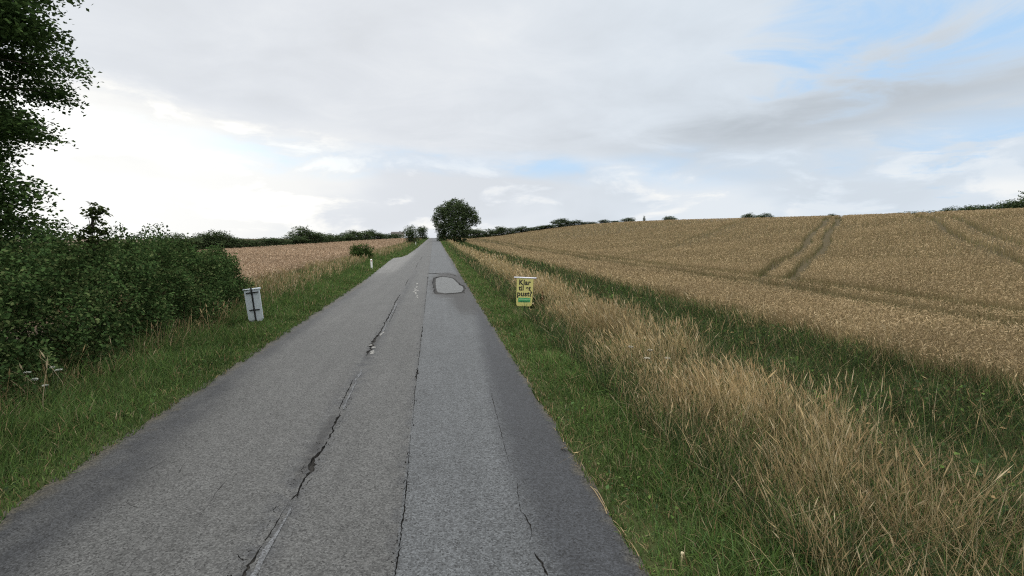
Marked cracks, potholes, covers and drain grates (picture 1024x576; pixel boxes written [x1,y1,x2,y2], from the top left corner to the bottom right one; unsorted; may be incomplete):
crack [492,398,548,576]
crack [227,281,408,576]
